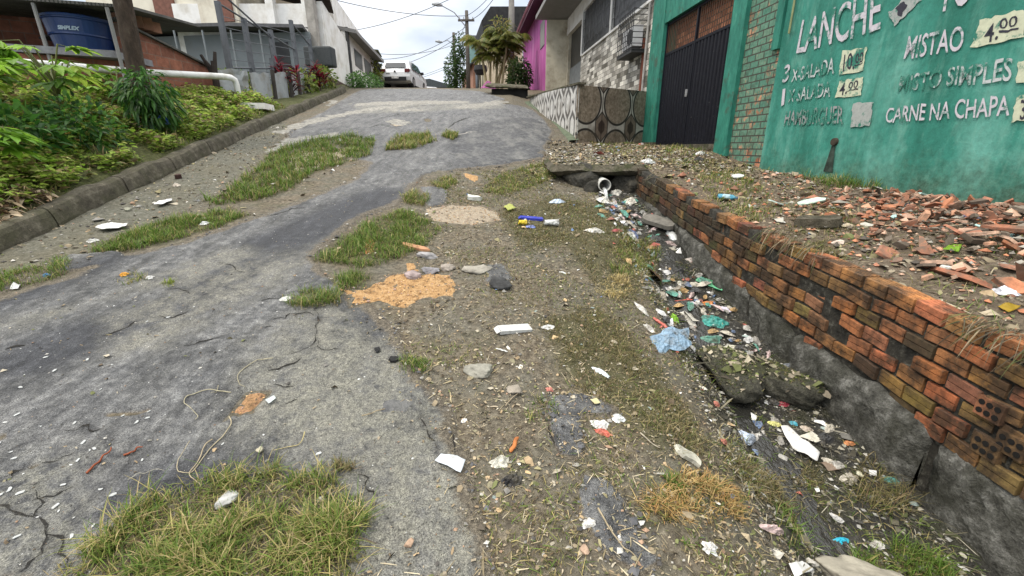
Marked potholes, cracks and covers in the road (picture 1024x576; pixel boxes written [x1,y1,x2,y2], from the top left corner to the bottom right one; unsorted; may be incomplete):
crack [261,296,337,404]
crack [0,469,71,575]
